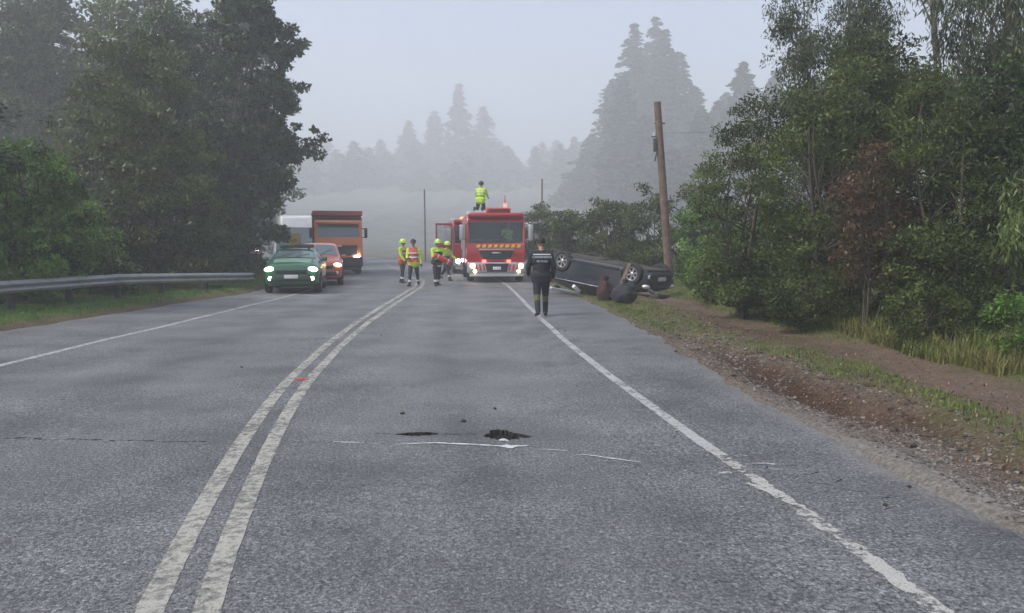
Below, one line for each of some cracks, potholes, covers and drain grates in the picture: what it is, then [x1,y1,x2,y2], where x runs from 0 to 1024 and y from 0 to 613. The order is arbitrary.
pothole [484,429,534,442]
